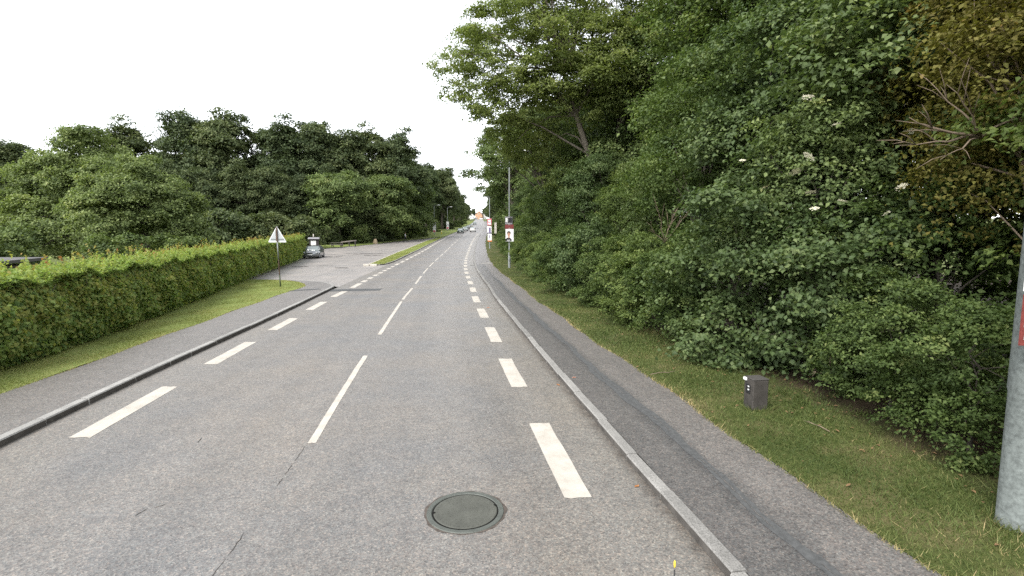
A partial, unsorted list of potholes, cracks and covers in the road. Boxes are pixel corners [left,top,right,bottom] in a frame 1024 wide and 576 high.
manhole cover [424,491,508,535]
